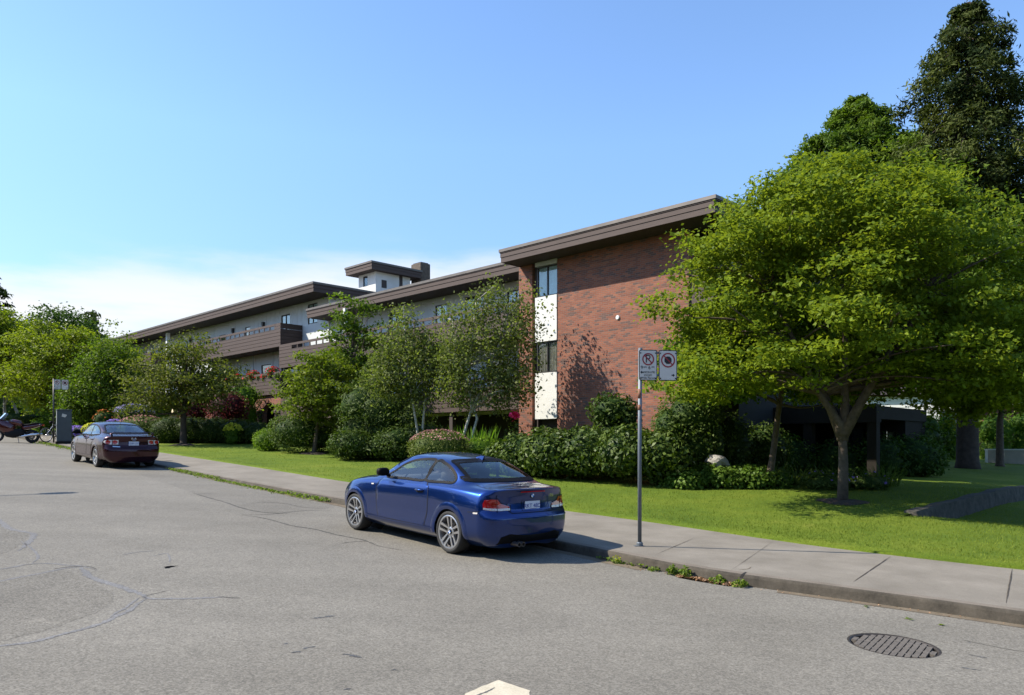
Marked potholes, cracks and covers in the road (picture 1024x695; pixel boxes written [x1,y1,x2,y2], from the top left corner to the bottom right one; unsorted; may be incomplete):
crack [194,493,400,550]
